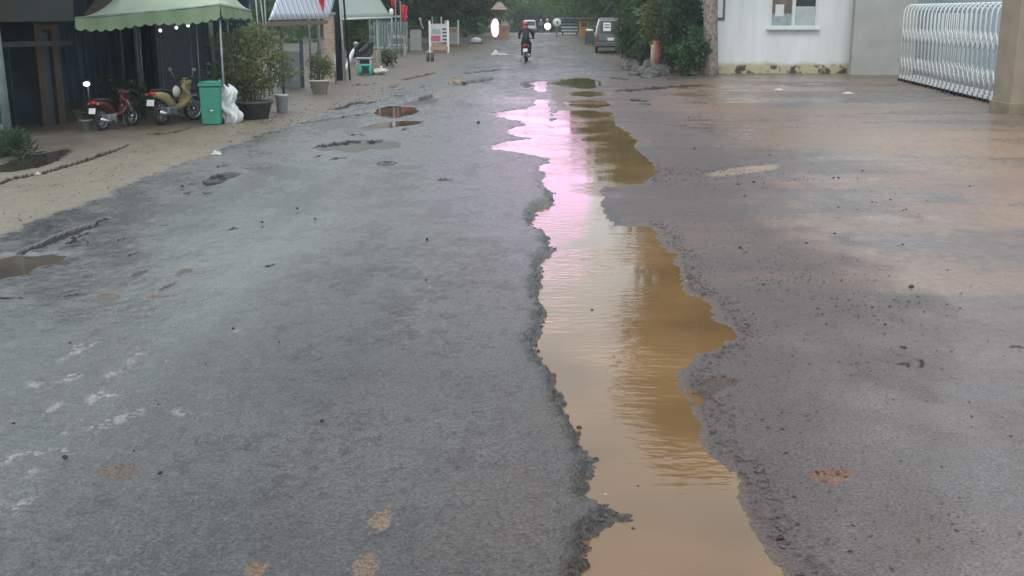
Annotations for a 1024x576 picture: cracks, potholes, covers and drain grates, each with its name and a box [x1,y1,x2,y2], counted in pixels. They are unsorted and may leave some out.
pothole [315,140,402,153]
pothole [547,77,604,89]
pothole [199,171,243,187]
pothole [486,98,800,576]
pothole [527,79,552,92]
pothole [0,251,73,280]
pothole [357,119,427,129]
crack [65,217,141,260]
pothole [372,105,421,119]
